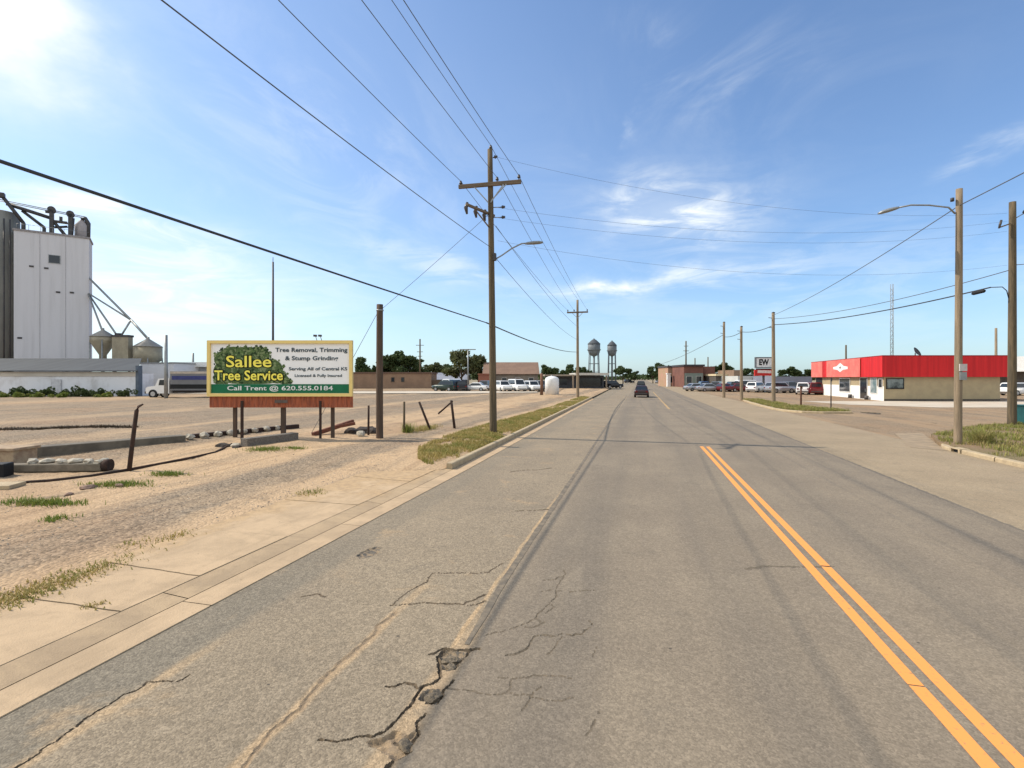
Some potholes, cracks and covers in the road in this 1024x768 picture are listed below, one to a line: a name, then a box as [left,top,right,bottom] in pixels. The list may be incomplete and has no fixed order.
pothole [439,650,466,671]
crack [241,563,600,768]
pothole [366,730,417,761]
crack [14,674,191,768]
pothole [418,689,446,705]
pothole [356,547,383,559]
